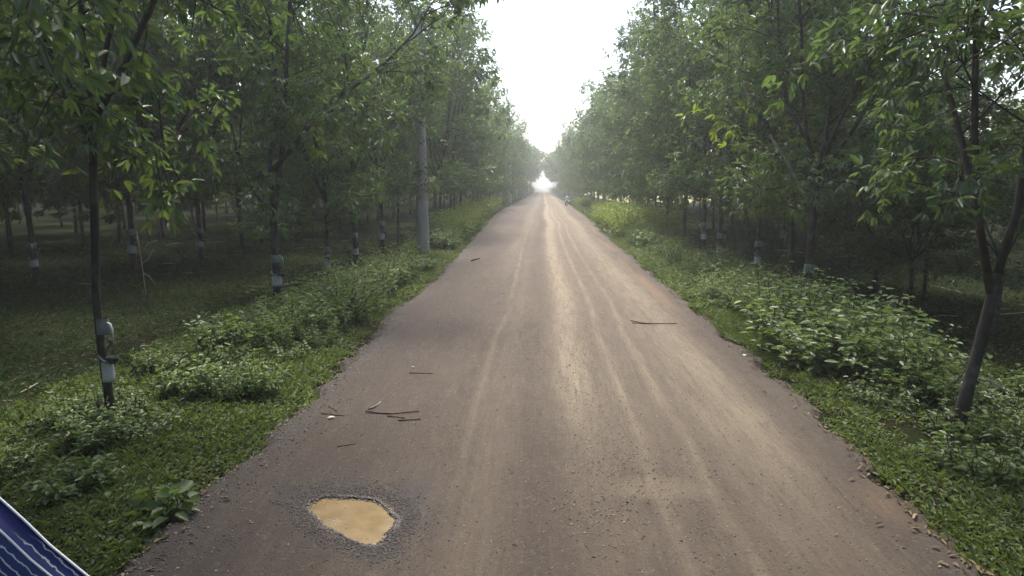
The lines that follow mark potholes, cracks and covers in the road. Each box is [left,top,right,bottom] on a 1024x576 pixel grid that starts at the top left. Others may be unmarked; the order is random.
pothole [302,493,402,547]
